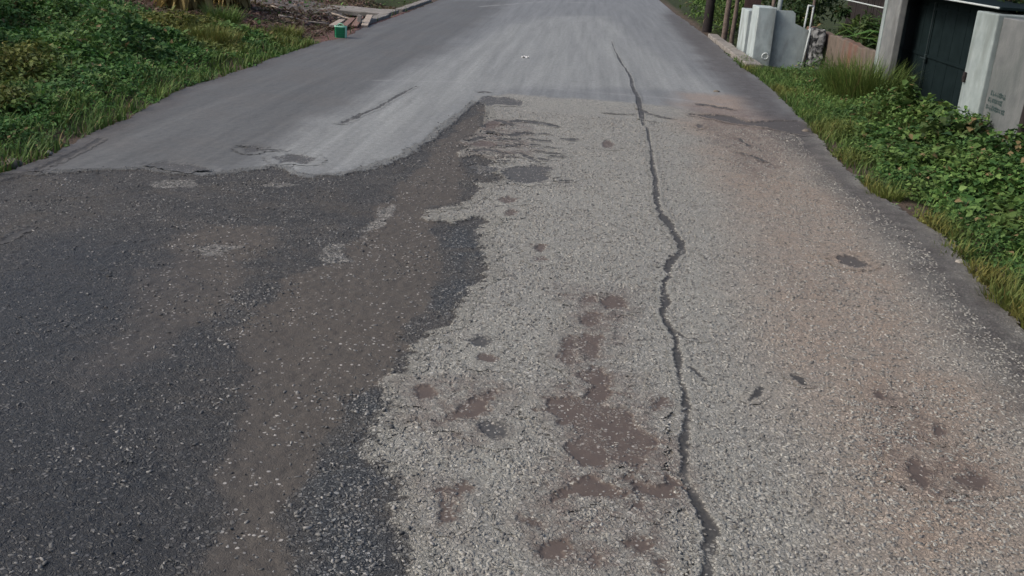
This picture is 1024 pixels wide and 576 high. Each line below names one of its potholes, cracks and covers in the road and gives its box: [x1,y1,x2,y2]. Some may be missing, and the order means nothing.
crack [332,86,420,124]
crack [600,41,815,576]
